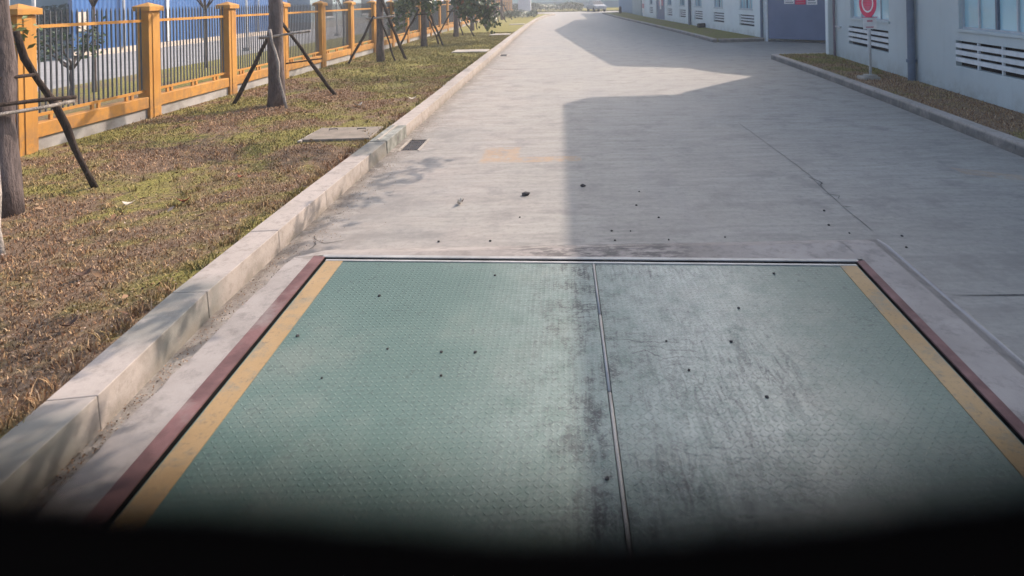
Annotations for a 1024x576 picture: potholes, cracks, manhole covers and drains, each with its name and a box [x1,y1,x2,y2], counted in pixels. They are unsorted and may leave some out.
crack [743,126,869,228]
drain grate [397,138,430,151]
manhole cover [297,126,383,143]
